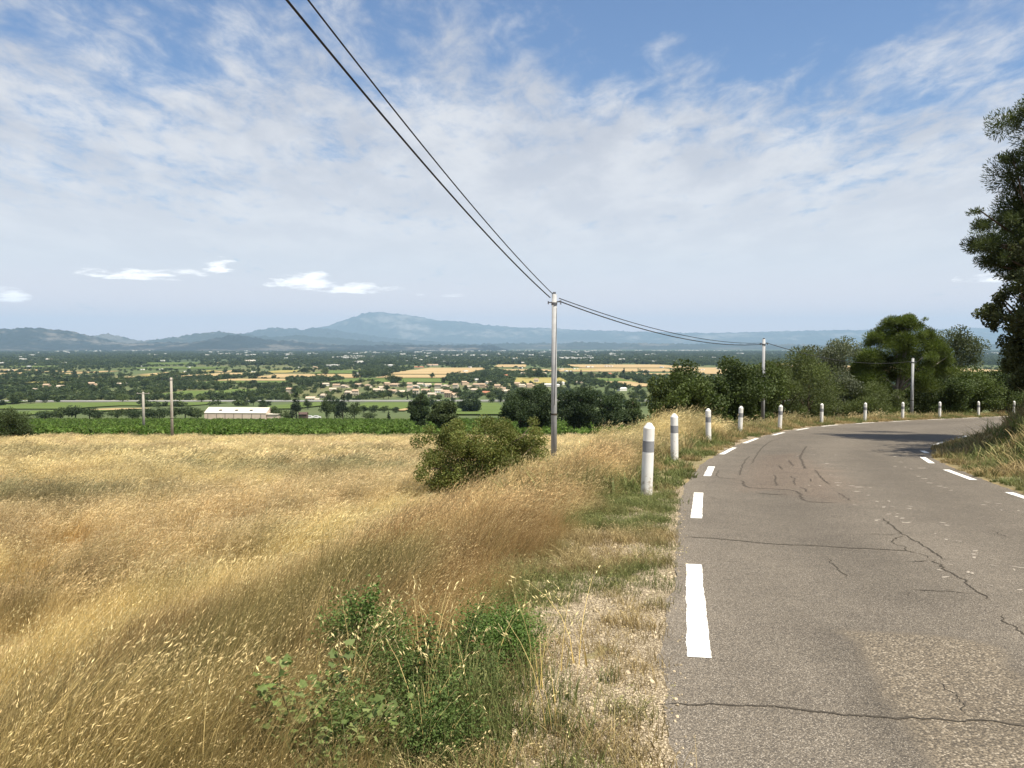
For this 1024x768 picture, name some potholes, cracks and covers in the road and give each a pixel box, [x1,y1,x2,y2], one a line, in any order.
crack [715,439,850,503]
crack [666,680,1024,726]
crack [700,518,1024,634]
